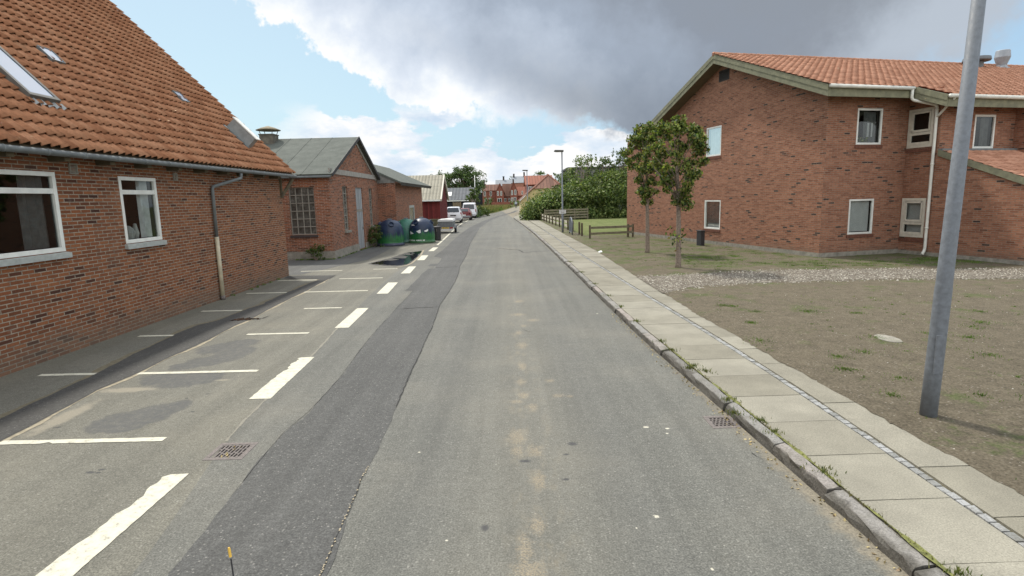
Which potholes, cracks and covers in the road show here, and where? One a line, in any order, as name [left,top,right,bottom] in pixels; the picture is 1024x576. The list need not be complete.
drain grate [702,415,742,429]
drain grate [202,442,259,461]
